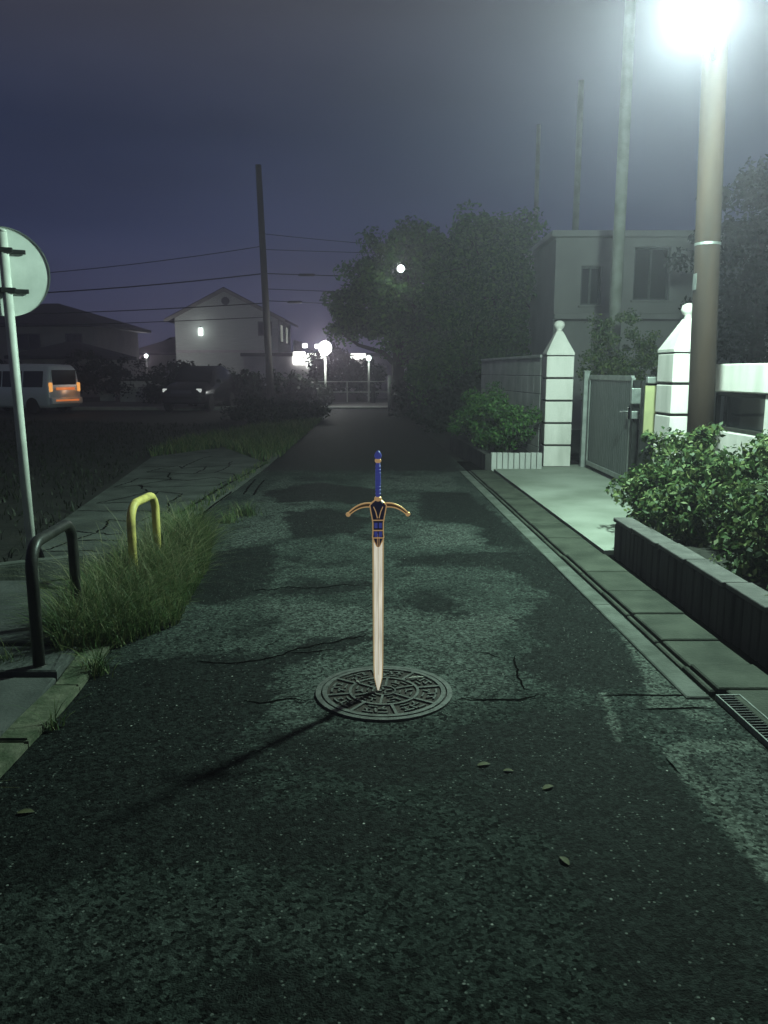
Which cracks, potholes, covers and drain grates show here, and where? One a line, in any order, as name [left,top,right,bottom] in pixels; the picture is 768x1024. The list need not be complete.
drain grate [715,694,768,748]
crack [201,635,365,664]
manhole cover [316,666,452,722]
crack [457,652,538,700]
